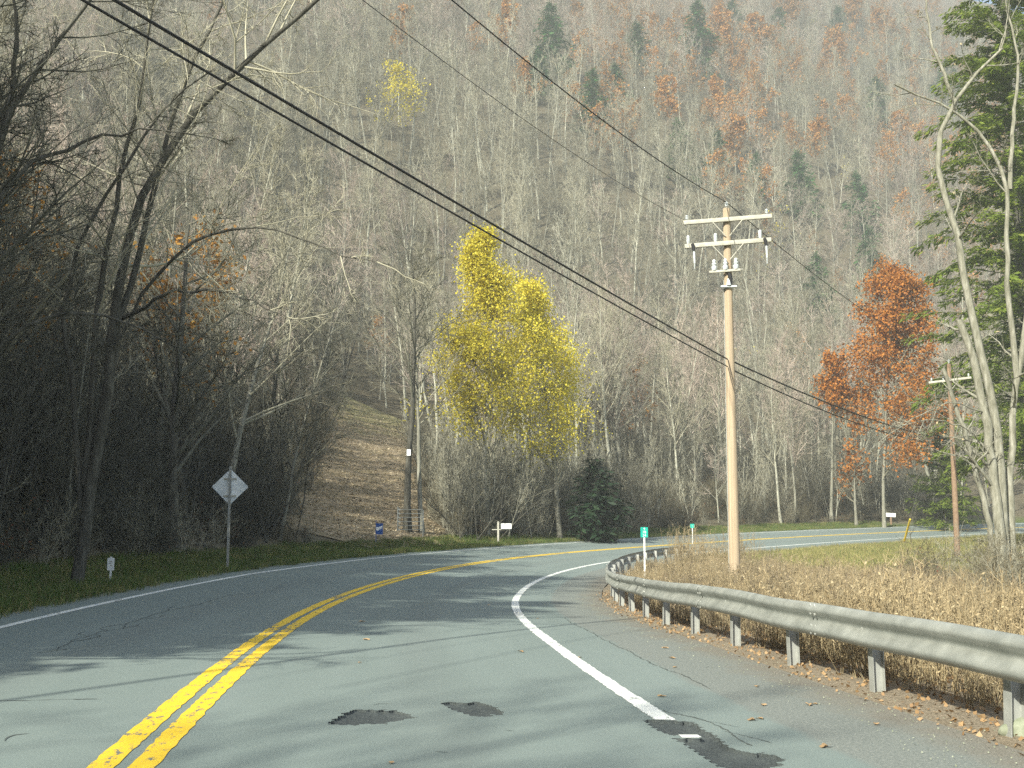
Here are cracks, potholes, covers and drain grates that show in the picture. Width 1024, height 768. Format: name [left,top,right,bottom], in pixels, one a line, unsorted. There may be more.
pothole [328,709,417,726]
pothole [644,720,786,768]
crack [46,595,231,652]
crack [664,710,771,745]
pothole [441,702,504,717]
